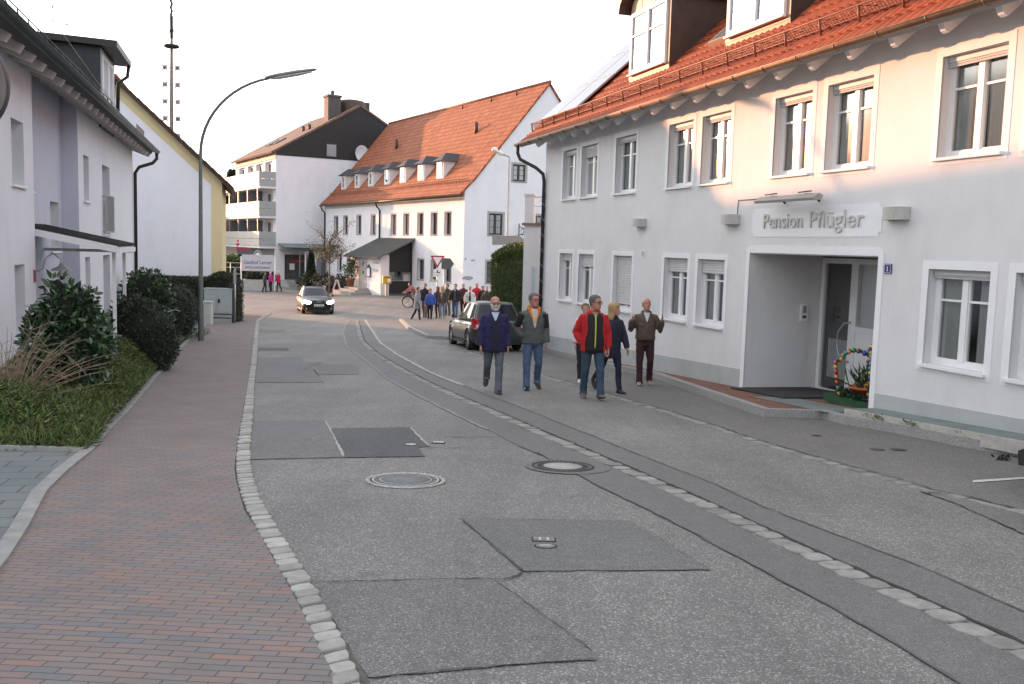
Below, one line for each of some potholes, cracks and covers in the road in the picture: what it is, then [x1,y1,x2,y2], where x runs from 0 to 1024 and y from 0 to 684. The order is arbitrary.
manhole cover [366,472,445,488]
manhole cover [531,460,595,472]
